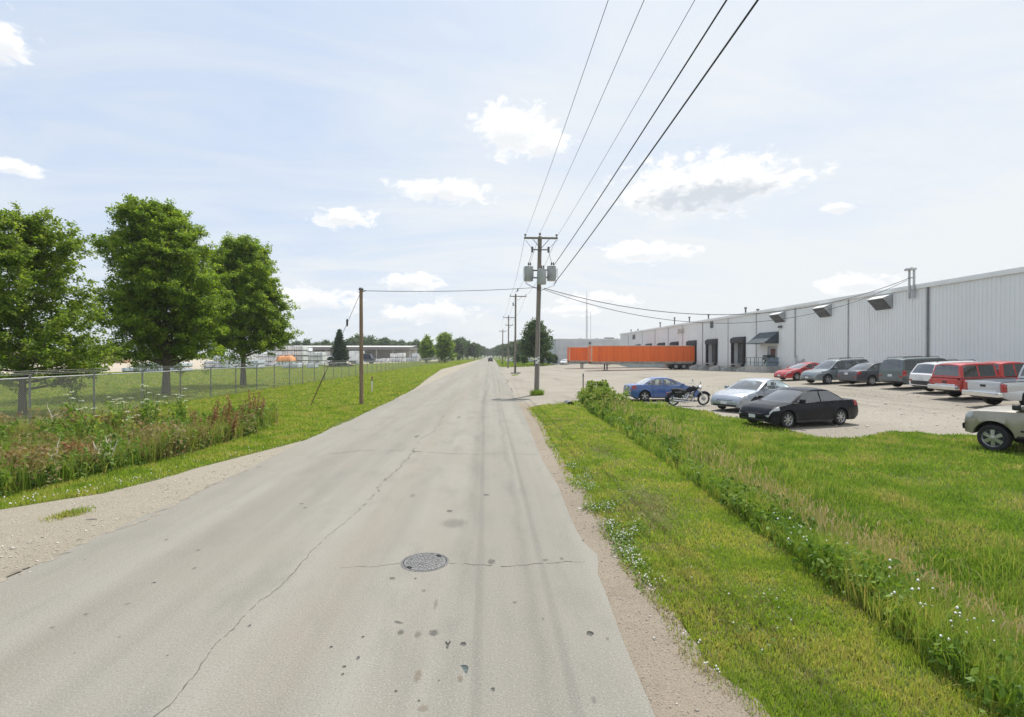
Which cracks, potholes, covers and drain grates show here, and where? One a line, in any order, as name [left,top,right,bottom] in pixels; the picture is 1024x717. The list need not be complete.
manhole cover [401,552,449,572]
crack [153,384,538,717]
